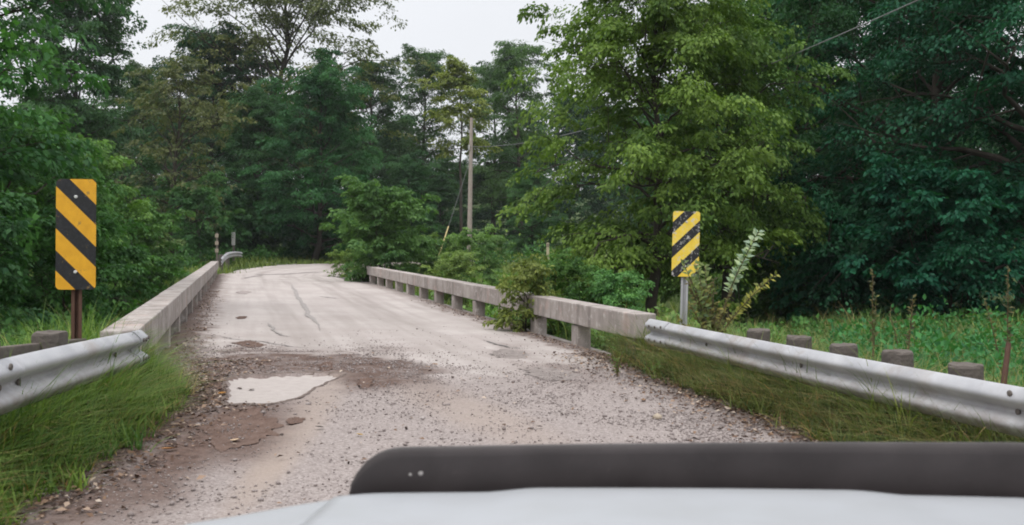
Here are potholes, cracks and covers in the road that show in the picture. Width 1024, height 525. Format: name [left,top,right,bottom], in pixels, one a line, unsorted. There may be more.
pothole [518,366,583,381]
crack [222,262,333,348]
pothole [232,340,265,348]
pothole [221,371,348,405]
pothole [489,349,528,359]
pothole [194,406,284,452]
